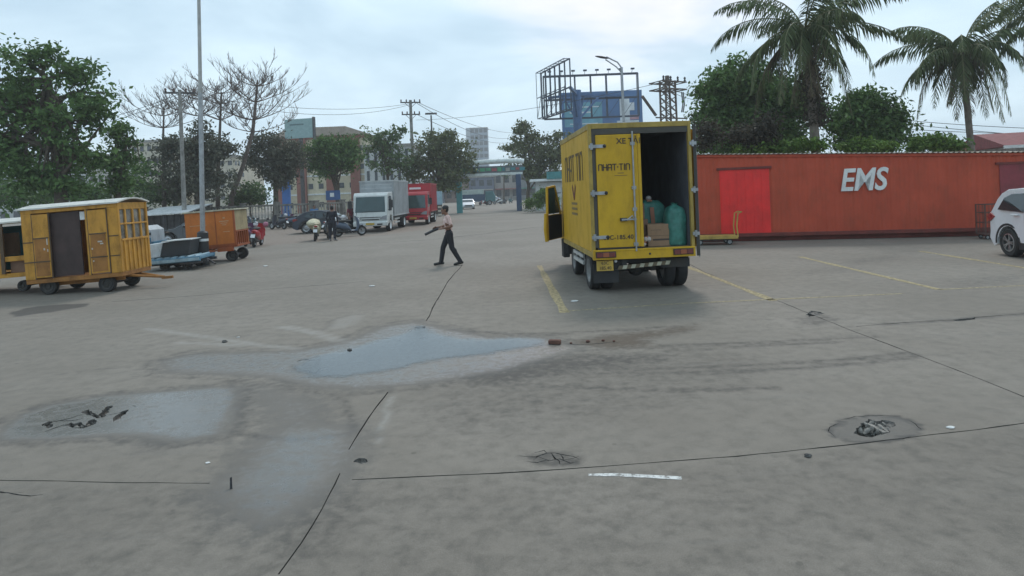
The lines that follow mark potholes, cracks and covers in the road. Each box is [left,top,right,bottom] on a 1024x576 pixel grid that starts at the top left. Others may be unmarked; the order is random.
pothole [854,419,896,437]
crack [42,406,136,432]
crack [524,450,578,464]
